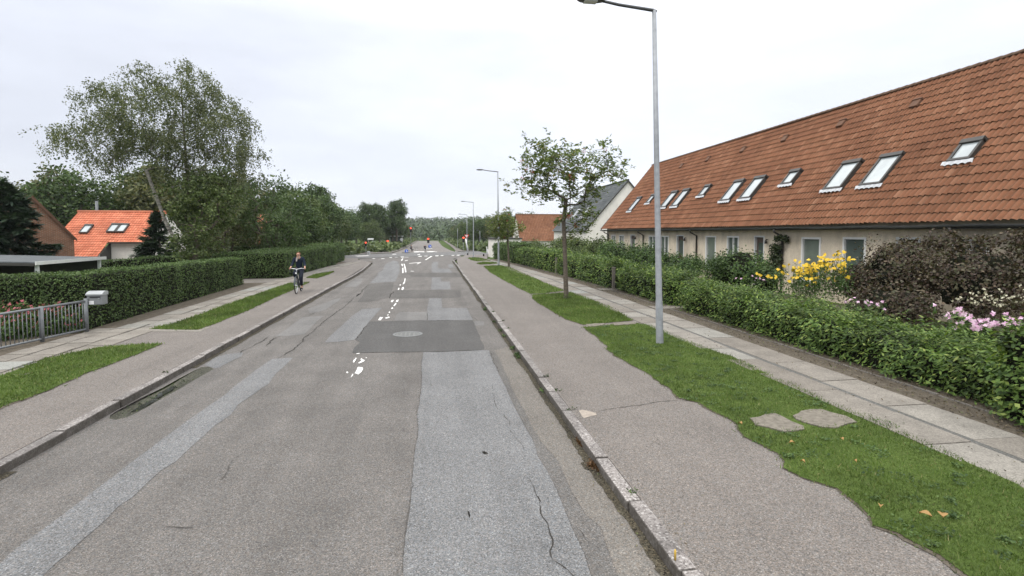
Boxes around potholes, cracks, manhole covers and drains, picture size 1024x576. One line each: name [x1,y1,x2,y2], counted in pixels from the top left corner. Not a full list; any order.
crack [514,476,574,576]
